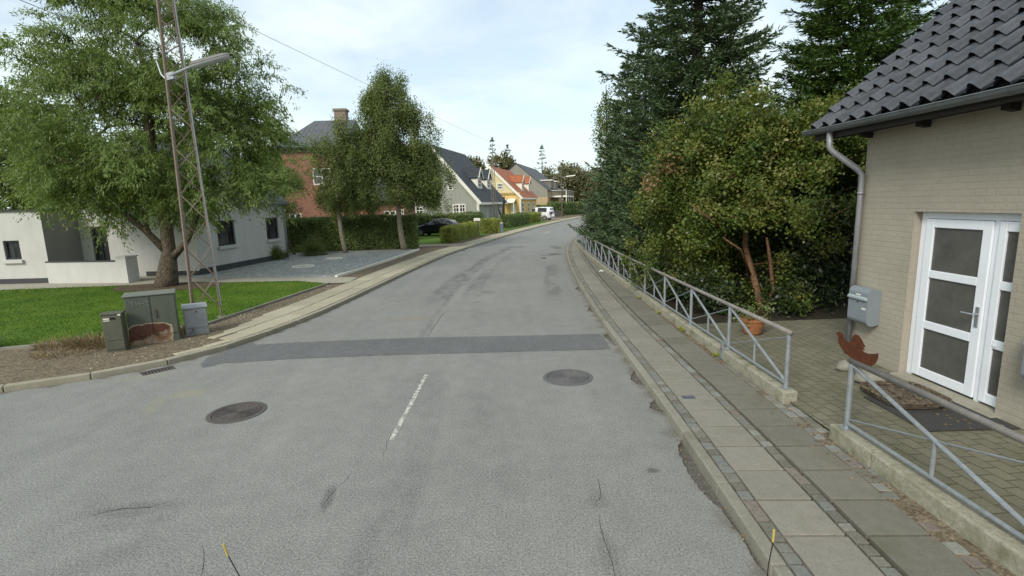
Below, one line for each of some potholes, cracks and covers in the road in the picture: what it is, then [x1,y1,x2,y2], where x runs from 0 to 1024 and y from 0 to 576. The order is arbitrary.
manhole cover [543,369,593,386]
drain grate [140,366,176,376]
crack [593,476,616,576]
manhole cover [205,401,267,424]
